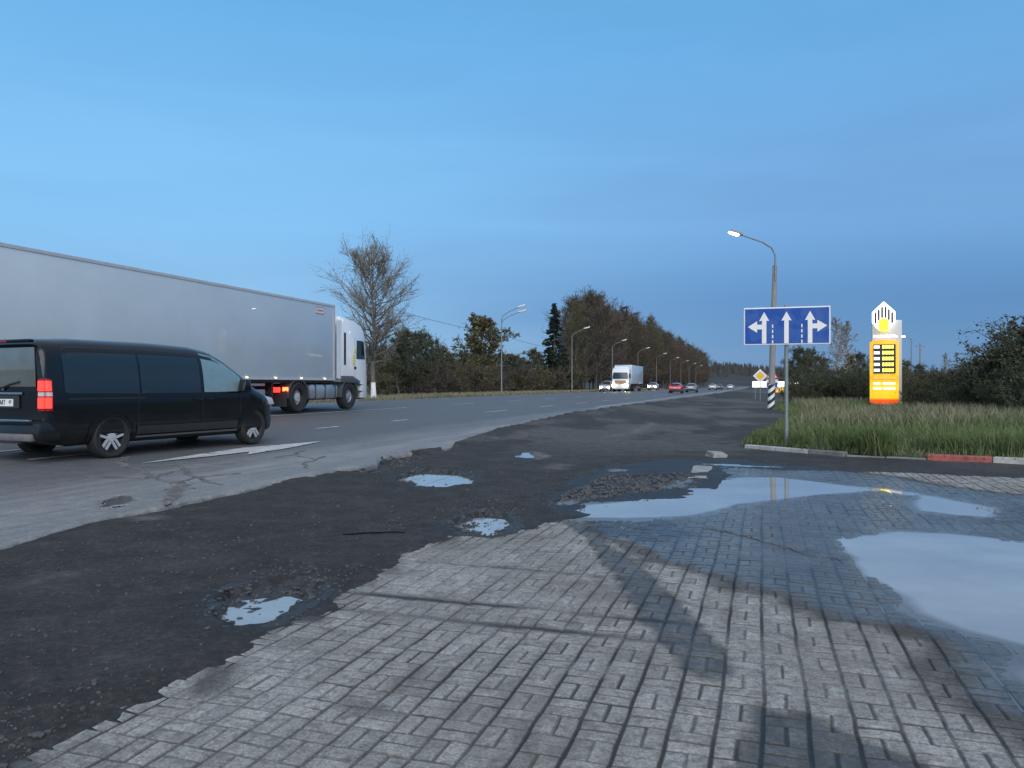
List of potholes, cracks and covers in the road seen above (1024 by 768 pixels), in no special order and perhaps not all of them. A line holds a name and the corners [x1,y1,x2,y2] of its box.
crack [277,450,326,469]
pothole [549,472,702,506]
pothole [444,507,525,539]
pothole [393,467,482,488]
pothole [201,572,344,627]
pothole [96,495,135,509]
crack [86,455,241,505]
crack [707,527,842,562]
